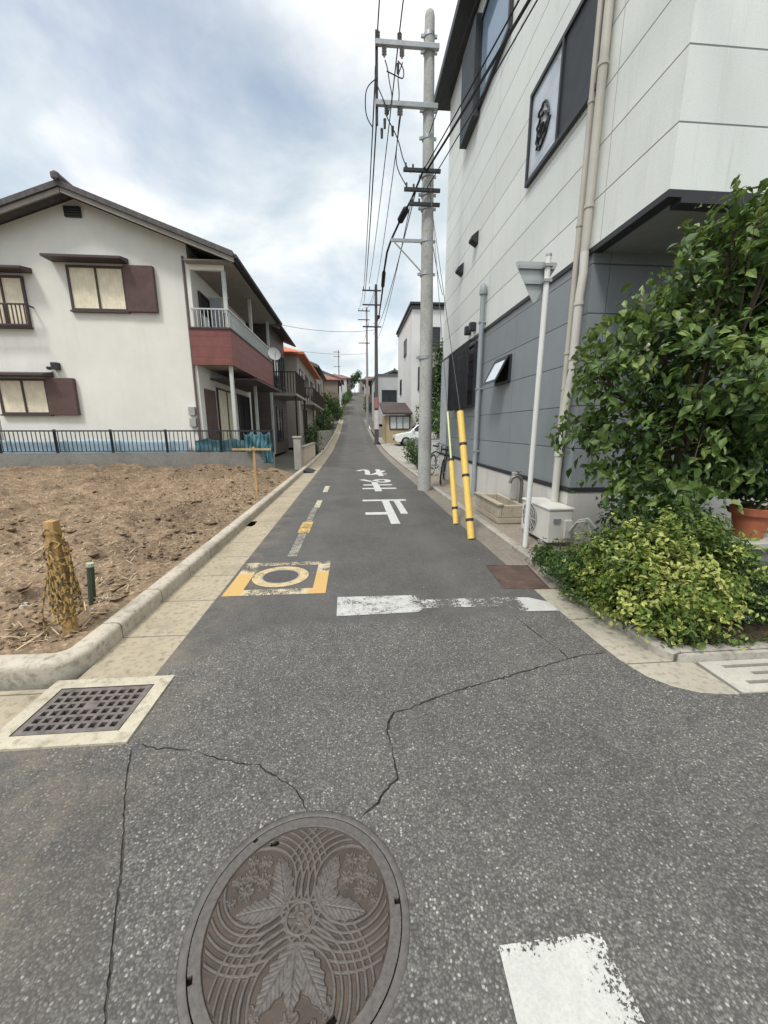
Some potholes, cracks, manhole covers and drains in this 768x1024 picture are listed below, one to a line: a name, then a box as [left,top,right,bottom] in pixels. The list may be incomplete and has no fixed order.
crack [103,744,307,1024]
drain grate [8,684,154,737]
manhole cover [176,811,410,1024]
manhole cover [486,565,550,589]
crack [360,616,601,819]
